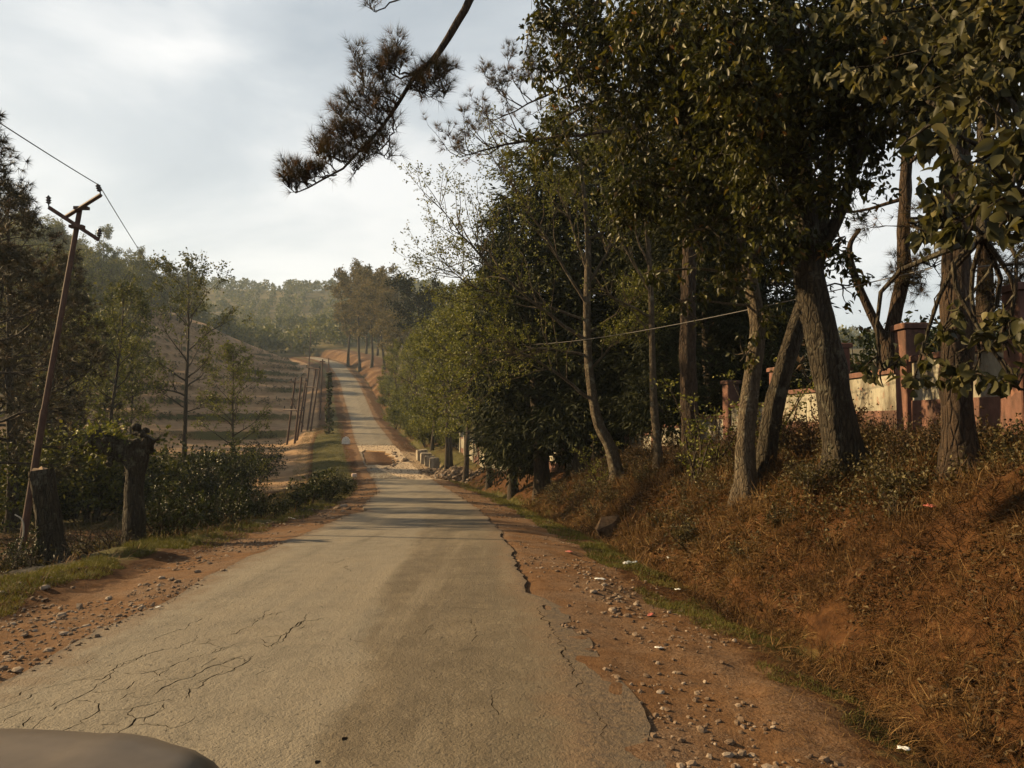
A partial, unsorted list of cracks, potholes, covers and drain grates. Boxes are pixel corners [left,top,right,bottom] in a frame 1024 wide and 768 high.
crack [537,607,608,742]
crack [0,611,322,733]
